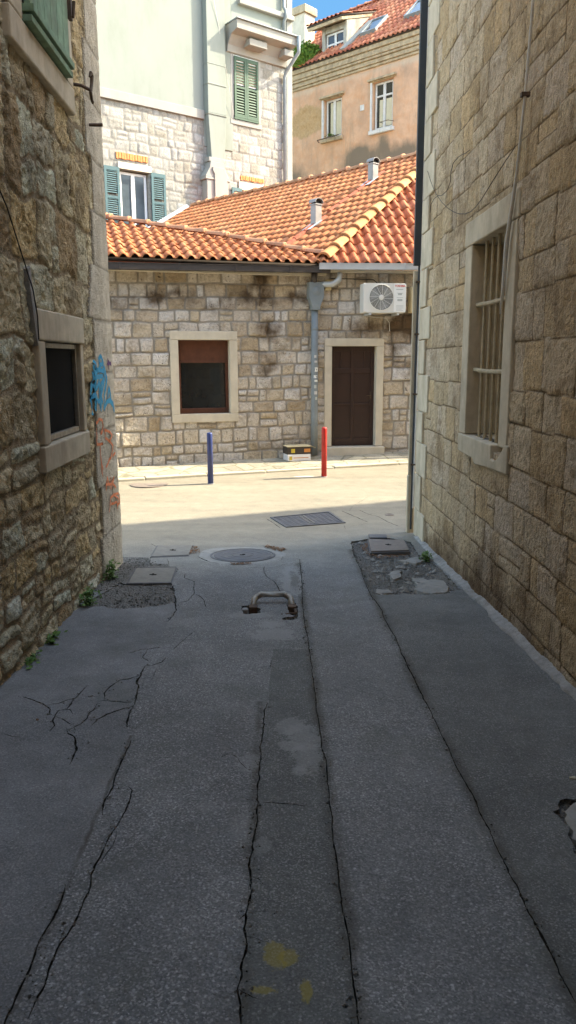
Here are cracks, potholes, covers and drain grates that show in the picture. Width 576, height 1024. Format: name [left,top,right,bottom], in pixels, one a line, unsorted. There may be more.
manhole cover [210,548,275,562]
manhole cover [150,545,194,558]
pothole [89,582,176,609]
crack [4,648,164,1024]
crack [149,544,283,650]
pothole [351,538,459,595]
pothole [553,798,576,854]
manhole cover [367,539,410,556]
manhole cover [126,567,177,586]
